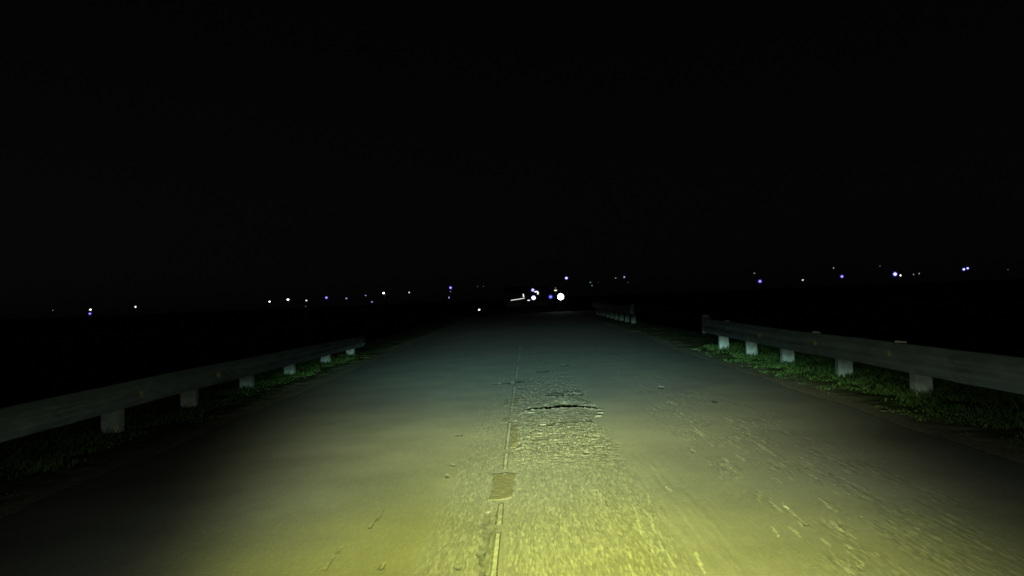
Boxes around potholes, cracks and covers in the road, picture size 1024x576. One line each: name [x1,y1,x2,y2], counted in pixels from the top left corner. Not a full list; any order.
pothole [529,399,596,409]
